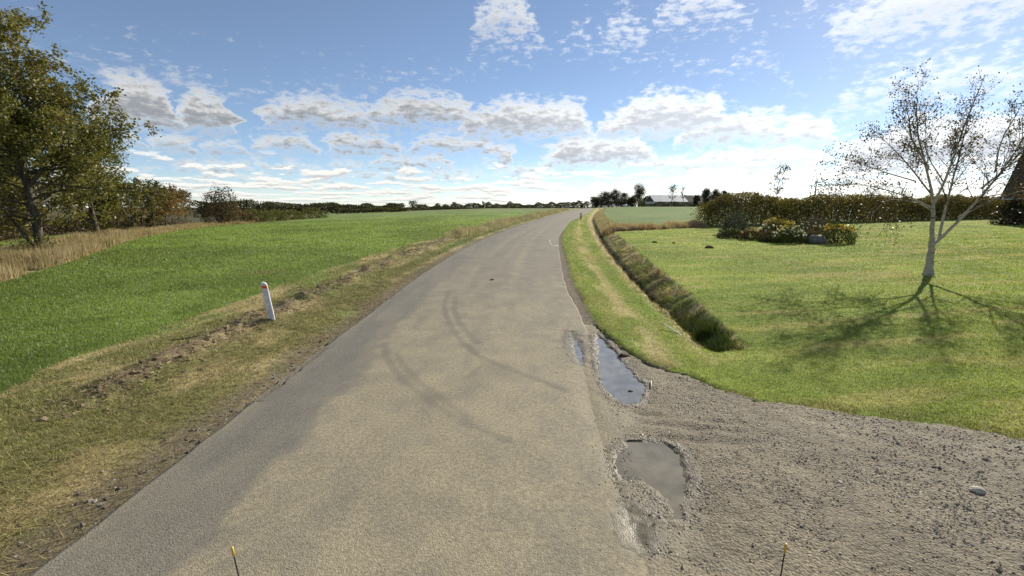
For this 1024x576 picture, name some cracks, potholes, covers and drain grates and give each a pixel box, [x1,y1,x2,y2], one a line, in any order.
pothole [604,435,701,529]
pothole [561,329,589,366]
pothole [589,331,654,408]
